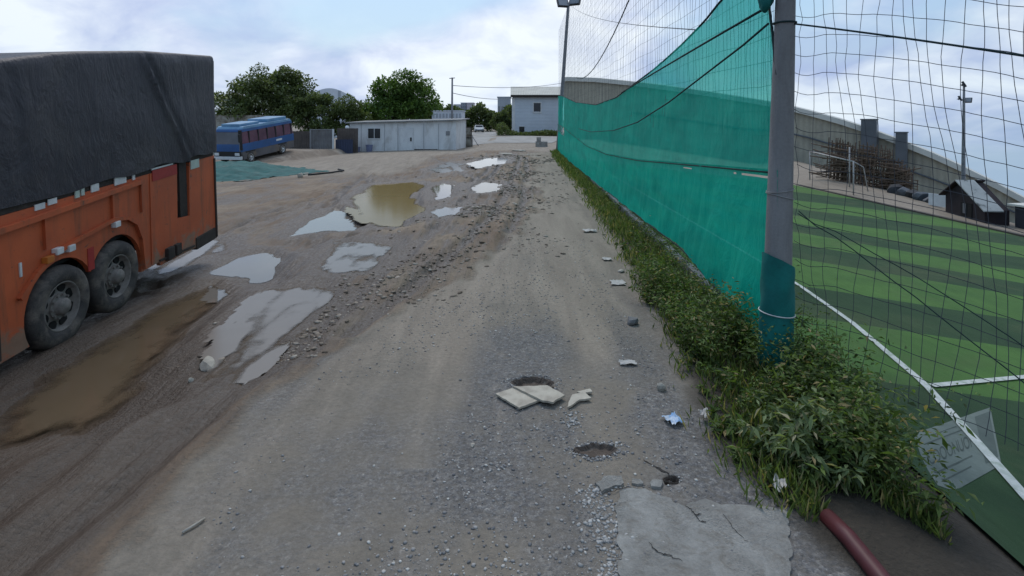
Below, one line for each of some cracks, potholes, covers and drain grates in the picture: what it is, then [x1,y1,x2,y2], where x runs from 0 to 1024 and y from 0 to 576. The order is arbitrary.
pothole [663,475,679,485]
pothole [511,377,554,389]
pothole [573,443,617,459]
